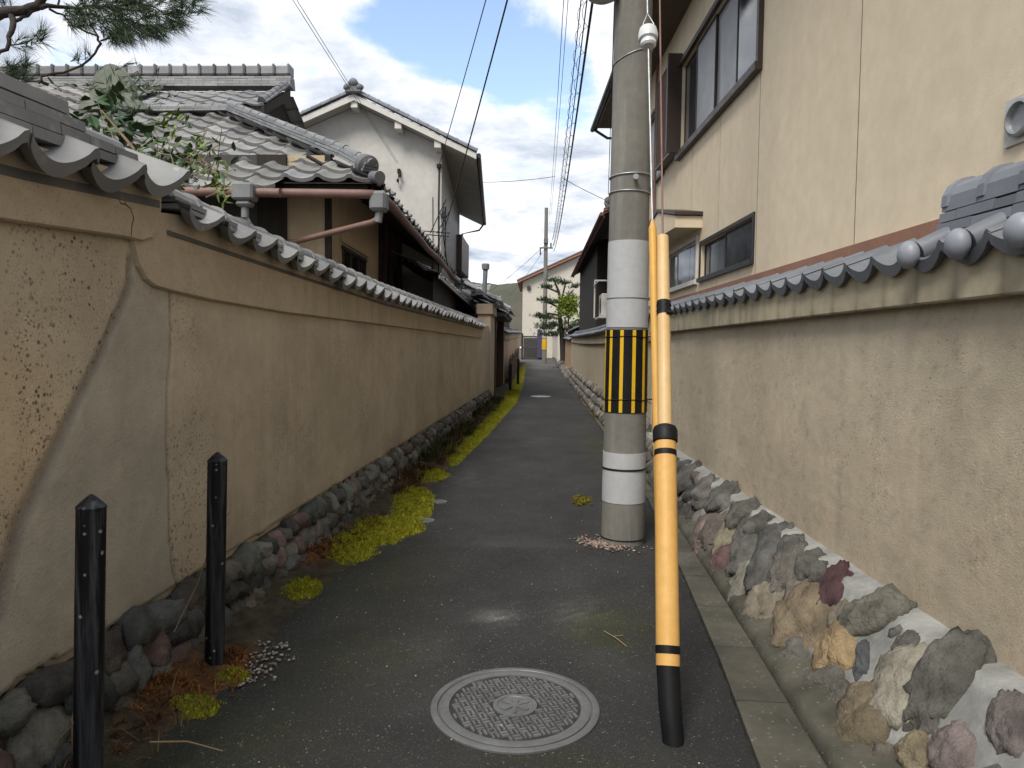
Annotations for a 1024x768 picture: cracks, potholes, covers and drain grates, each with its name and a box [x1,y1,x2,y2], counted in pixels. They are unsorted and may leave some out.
manhole cover [430,667,600,755]
